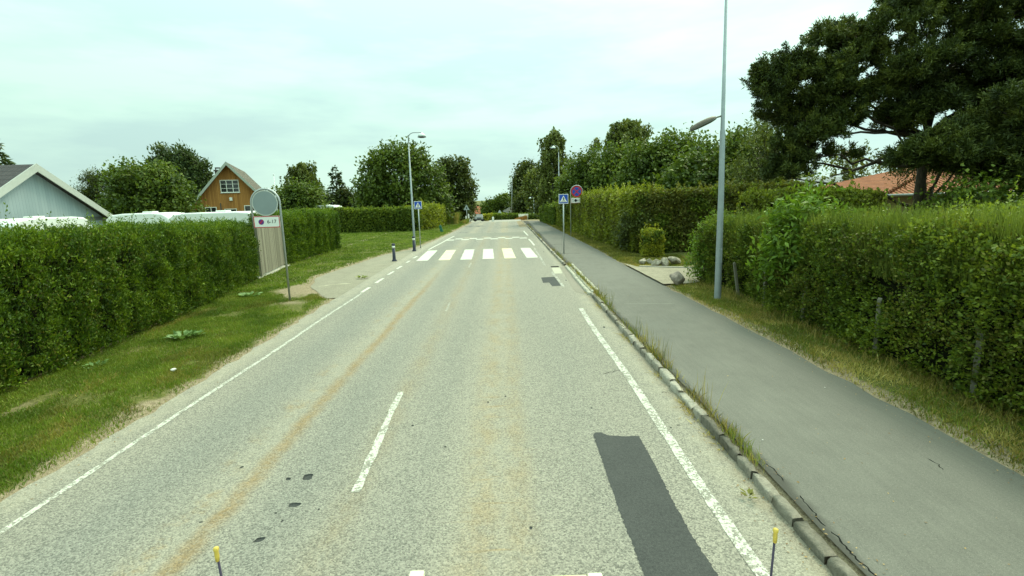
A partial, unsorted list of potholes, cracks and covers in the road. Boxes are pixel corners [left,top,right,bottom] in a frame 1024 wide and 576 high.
crack [800,496,876,576]
